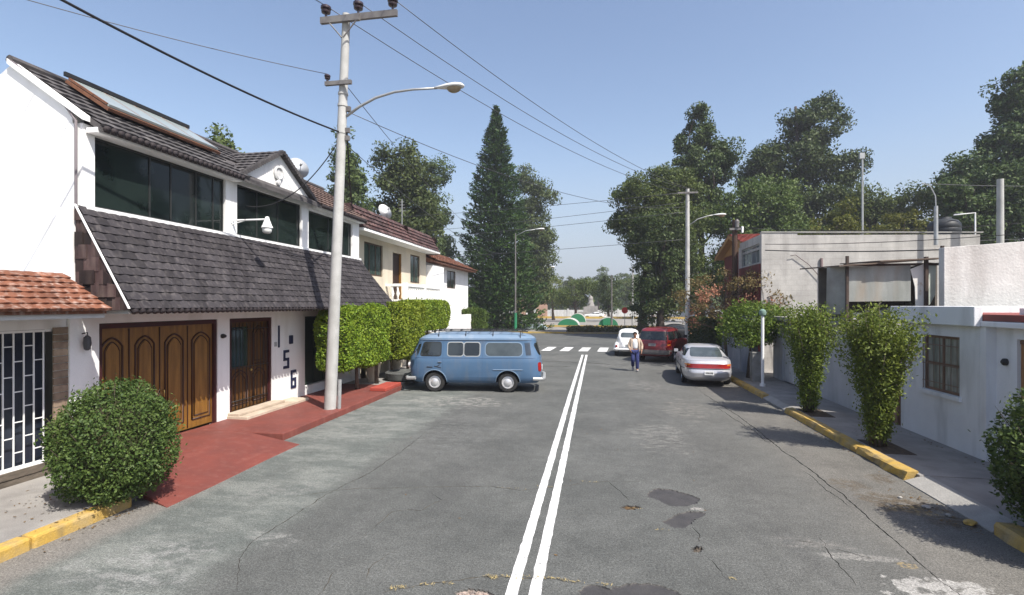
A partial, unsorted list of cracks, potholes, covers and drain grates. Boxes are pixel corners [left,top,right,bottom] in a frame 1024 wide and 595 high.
crack [798,539,881,585]
